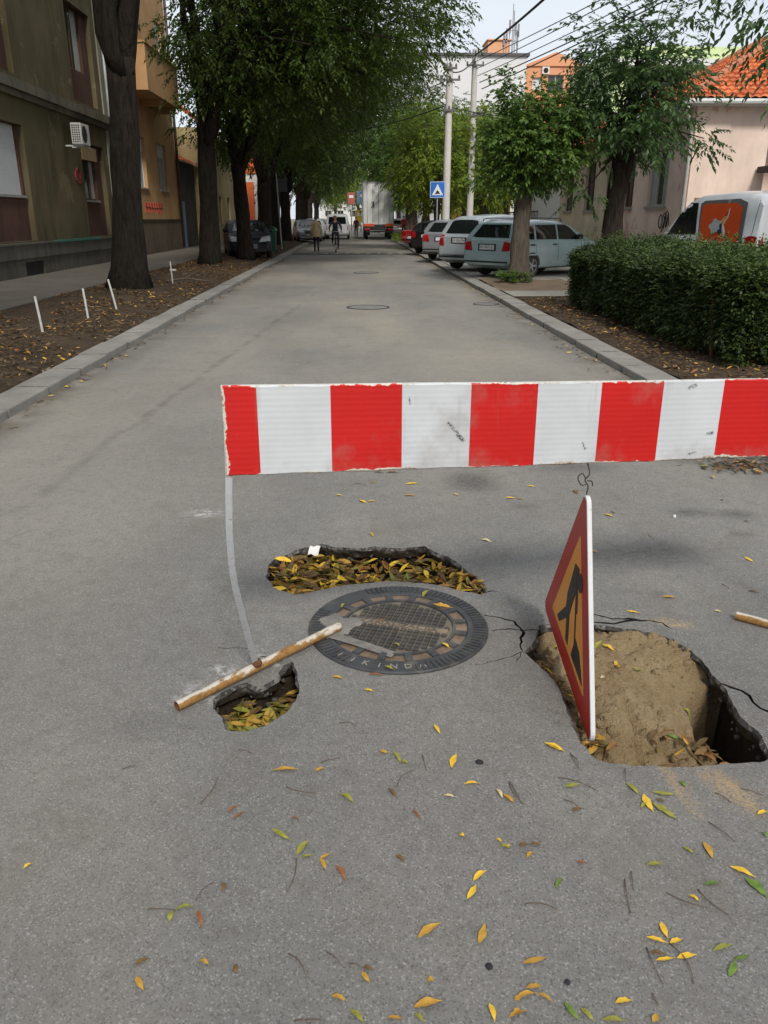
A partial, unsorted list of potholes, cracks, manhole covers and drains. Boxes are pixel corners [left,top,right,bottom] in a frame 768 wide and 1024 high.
crack [593,614,670,628]
manhole cover [308,586,489,675]
crack [723,683,768,712]
pothole [266,544,486,594]
crack [477,615,541,665]
pothole [213,661,299,731]
pothole [525,624,768,764]
